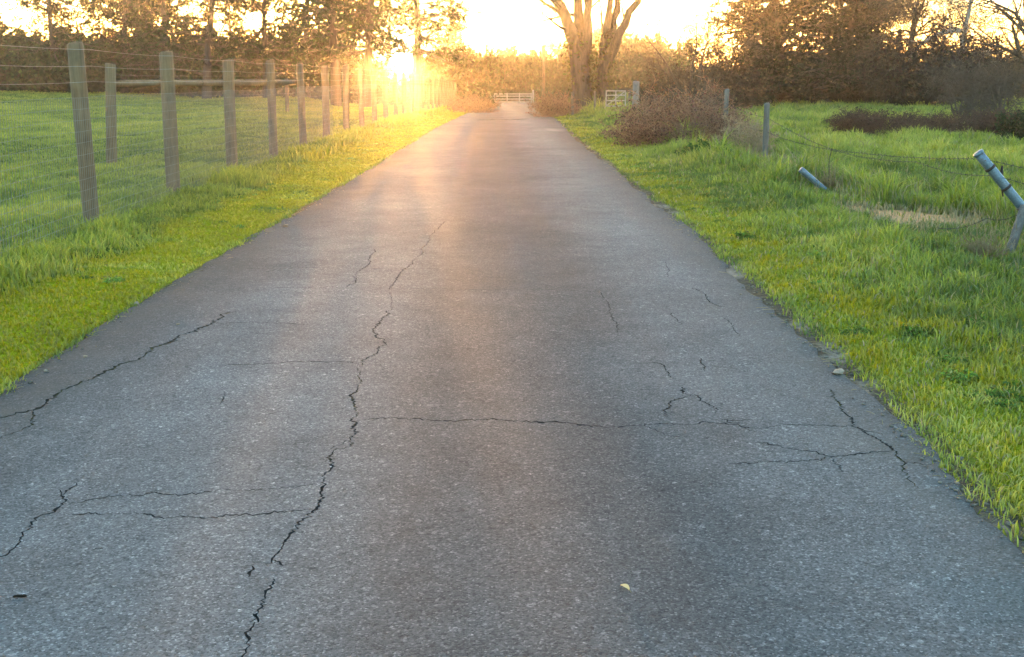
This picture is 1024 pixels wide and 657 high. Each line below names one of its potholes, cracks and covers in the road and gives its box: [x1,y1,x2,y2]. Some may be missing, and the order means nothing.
crack [248,222,619,333]
crack [357,359,933,489]
crack [0,293,393,657]
